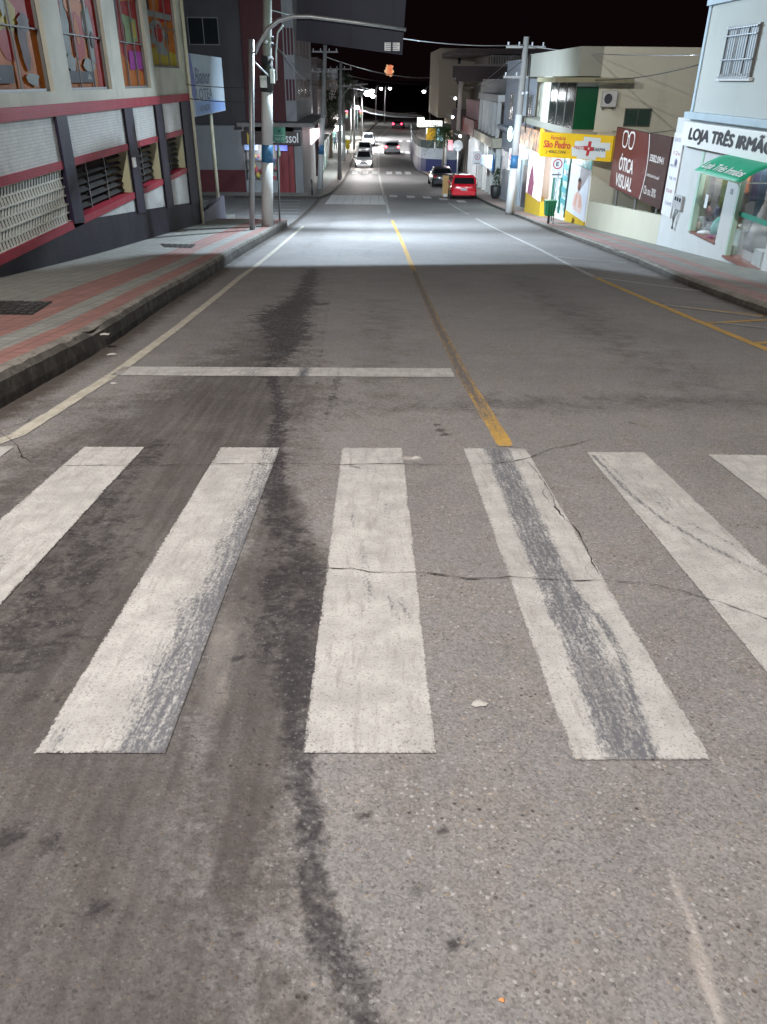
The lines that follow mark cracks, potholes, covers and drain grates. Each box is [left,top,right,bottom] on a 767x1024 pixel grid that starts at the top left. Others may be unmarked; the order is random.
crack [2,415,767,619]
